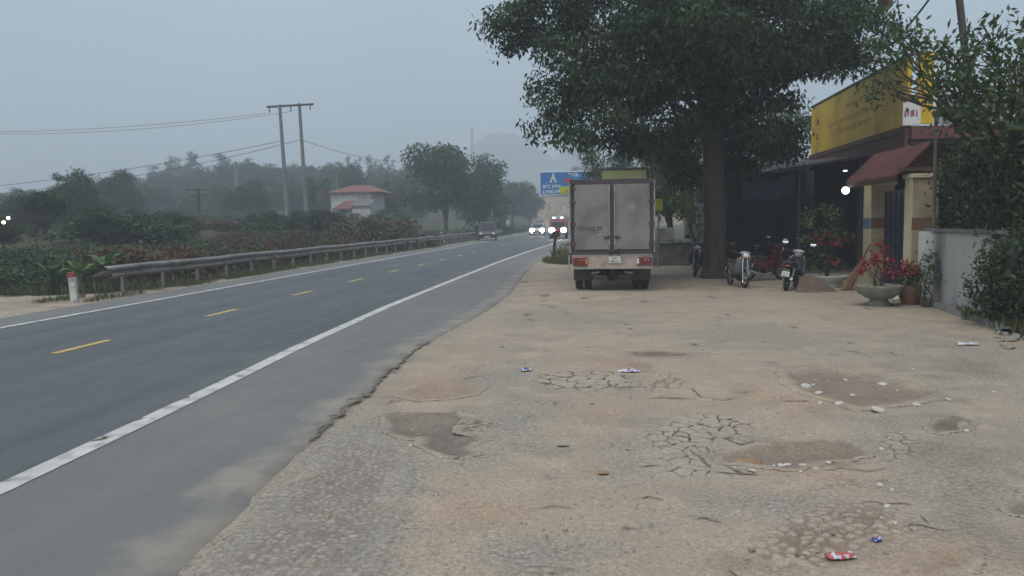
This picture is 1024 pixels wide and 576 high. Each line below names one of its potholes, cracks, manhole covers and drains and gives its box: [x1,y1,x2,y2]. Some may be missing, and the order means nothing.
pothole [392,379,492,401]
pothole [713,438,877,471]
crack [524,368,949,576]
pothole [377,409,495,460]
pothole [772,365,948,412]
pothole [919,415,982,436]
